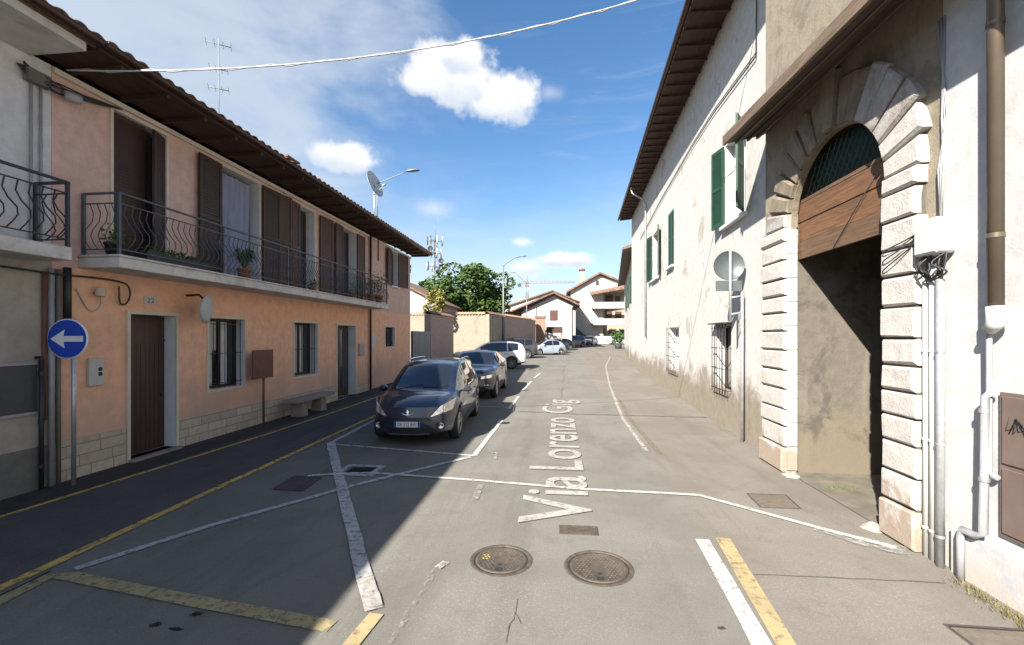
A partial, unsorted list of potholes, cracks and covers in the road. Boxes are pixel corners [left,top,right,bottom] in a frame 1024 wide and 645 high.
manhole cover [746,493,802,509]
manhole cover [564,550,634,587]
utility cover [942,623,1024,645]
manhole cover [470,545,533,577]
manhole cover [271,475,322,492]
